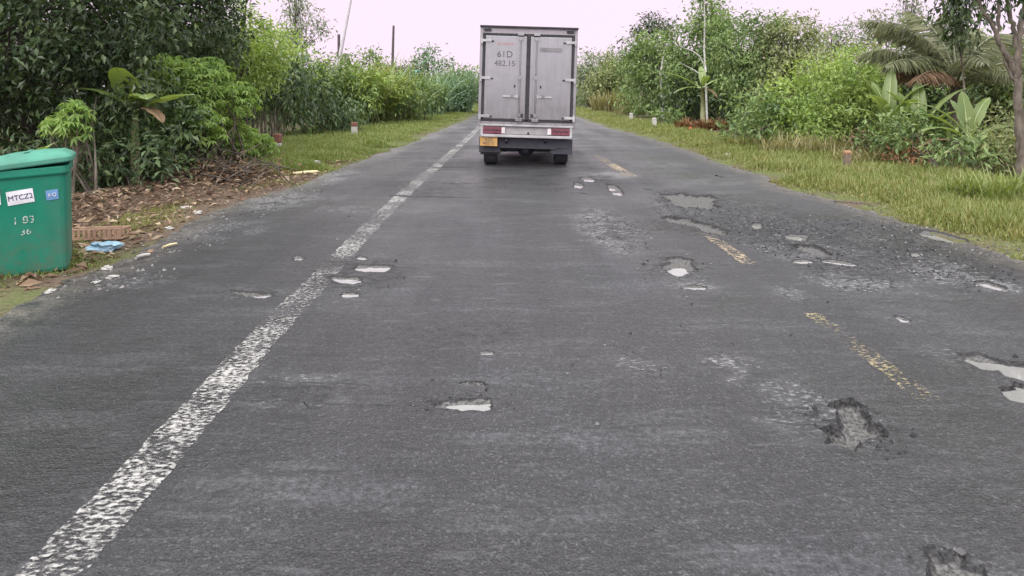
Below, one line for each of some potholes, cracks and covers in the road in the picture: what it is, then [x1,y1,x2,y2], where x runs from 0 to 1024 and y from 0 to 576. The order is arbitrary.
pothole [661,215,731,235]
pothole [659,256,698,278]
pothole [818,397,889,452]
pothole [786,244,833,257]
pothole [998,379,1024,403]
pothole [352,264,394,272]
pothole [431,396,493,412]
pothole [916,229,969,243]
pothole [606,184,625,196]
pothole [229,289,275,298]
pothole [328,276,363,284]
pothole [955,351,1024,381]
